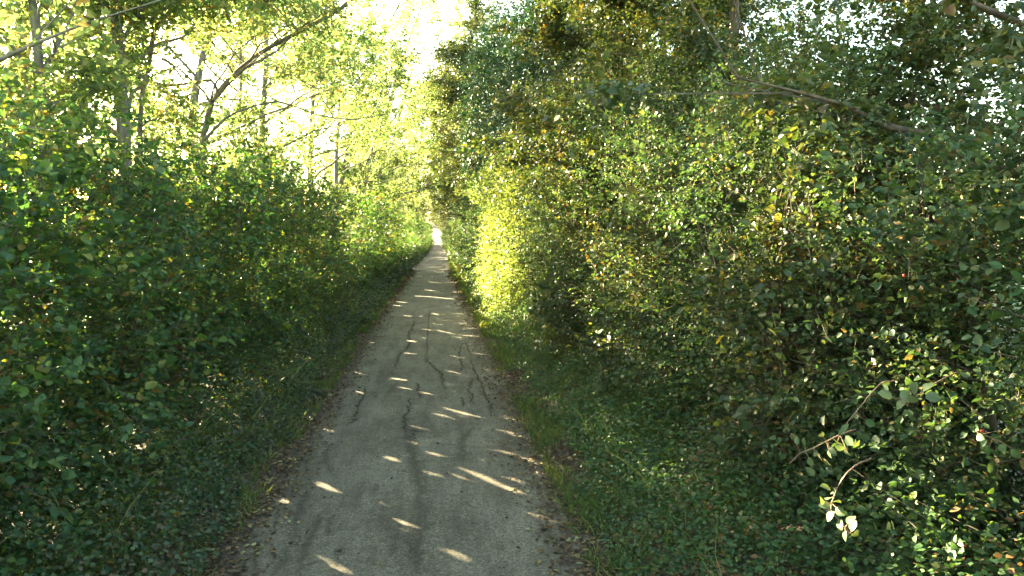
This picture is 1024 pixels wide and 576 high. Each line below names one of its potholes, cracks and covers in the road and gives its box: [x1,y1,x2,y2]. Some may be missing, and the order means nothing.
crack [343,310,496,463]
